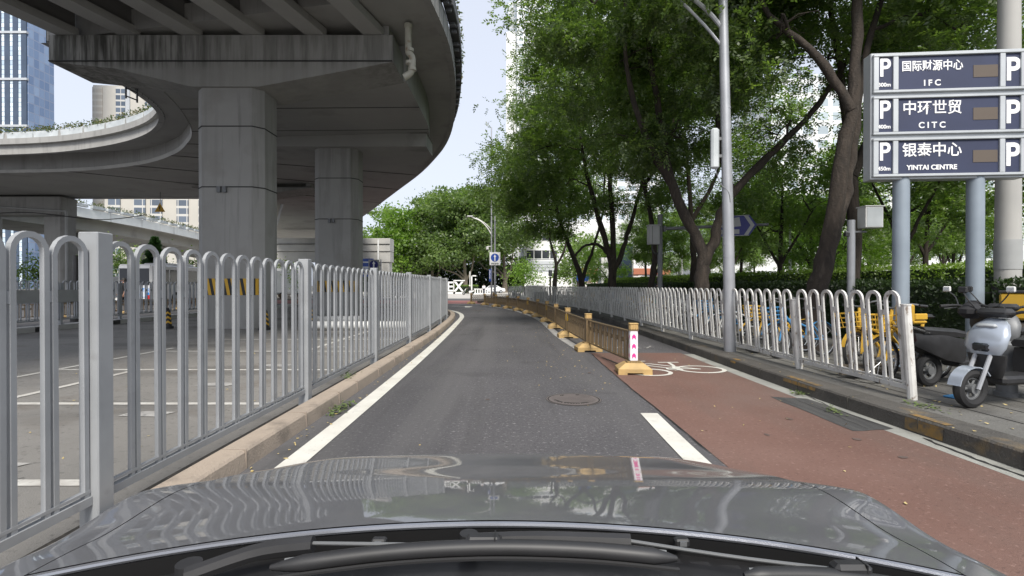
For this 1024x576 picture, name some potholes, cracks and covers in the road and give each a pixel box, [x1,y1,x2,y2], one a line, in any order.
manhole cover [546,393,602,406]
